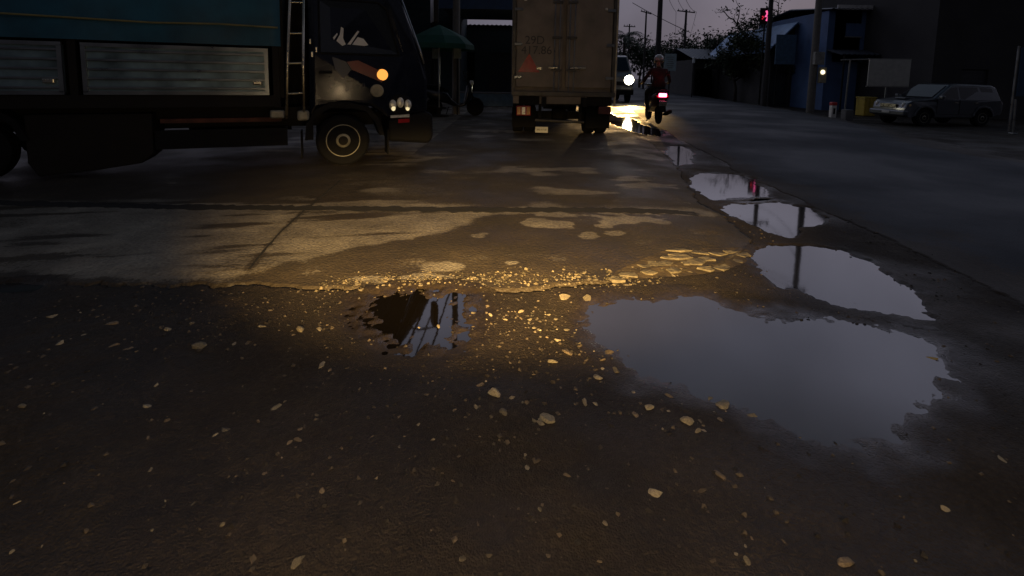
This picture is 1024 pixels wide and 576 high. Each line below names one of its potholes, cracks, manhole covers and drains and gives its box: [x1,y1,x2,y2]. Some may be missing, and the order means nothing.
pothole [552,279,1010,495]
pothole [741,240,954,331]
